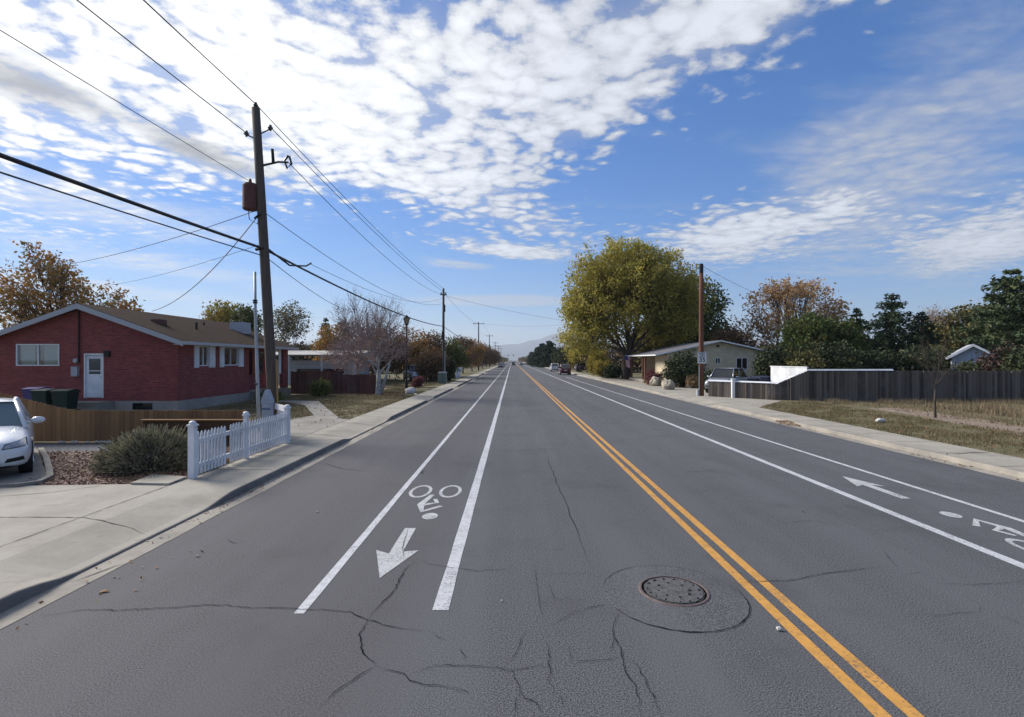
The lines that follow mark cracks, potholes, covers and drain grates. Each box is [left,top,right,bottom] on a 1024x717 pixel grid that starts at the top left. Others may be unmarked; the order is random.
manhole cover [638,575,711,607]
crack [42,529,563,712]
crack [535,553,895,713]
